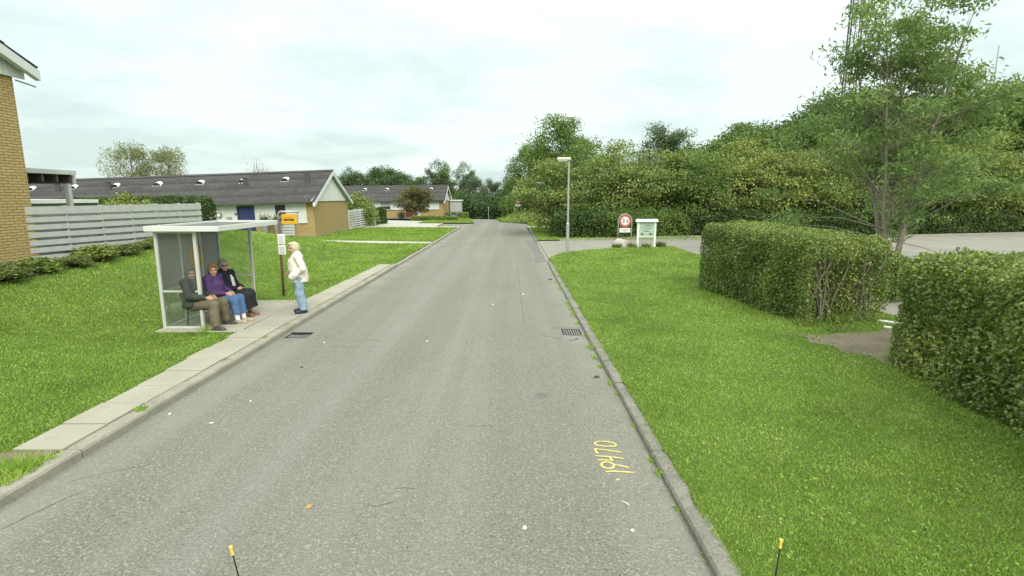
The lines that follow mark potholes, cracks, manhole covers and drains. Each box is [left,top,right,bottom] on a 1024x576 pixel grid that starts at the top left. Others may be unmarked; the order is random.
crack [1,464,151,530]
